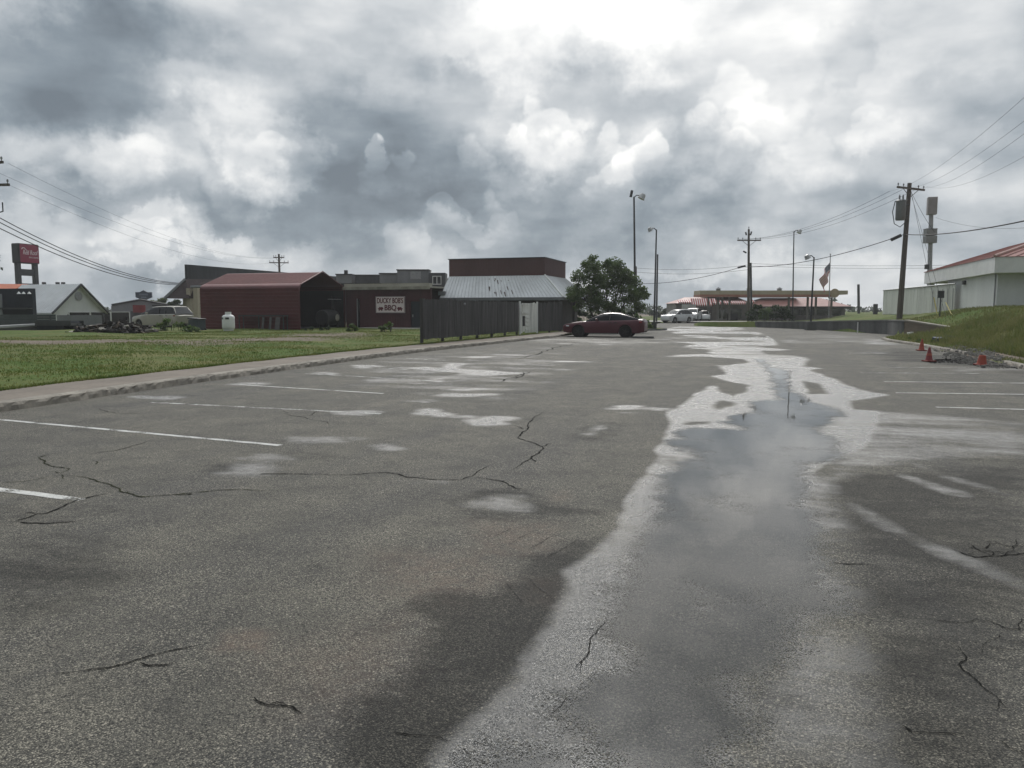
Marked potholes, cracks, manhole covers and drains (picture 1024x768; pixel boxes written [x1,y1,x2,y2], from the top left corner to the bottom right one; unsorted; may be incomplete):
crack [933,619,1024,709]
crack [0,414,551,523]
crack [899,723,1023,753]
crack [254,697,303,714]
crack [52,644,200,674]
crack [542,621,605,723]
